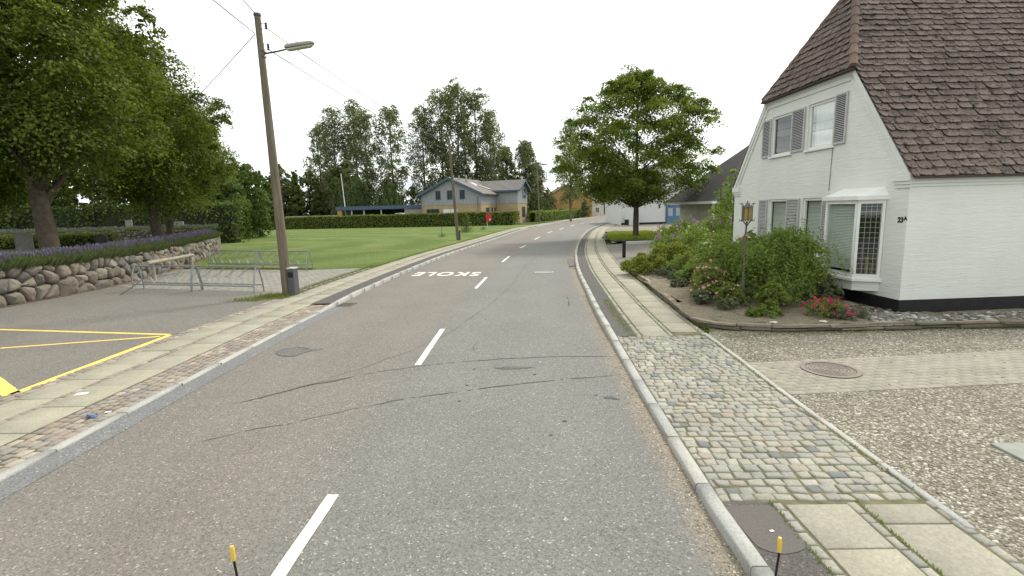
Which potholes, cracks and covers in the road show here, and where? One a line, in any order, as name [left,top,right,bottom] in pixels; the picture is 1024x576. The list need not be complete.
manhole cover [800,361,863,379]
crack [239,259,614,403]
